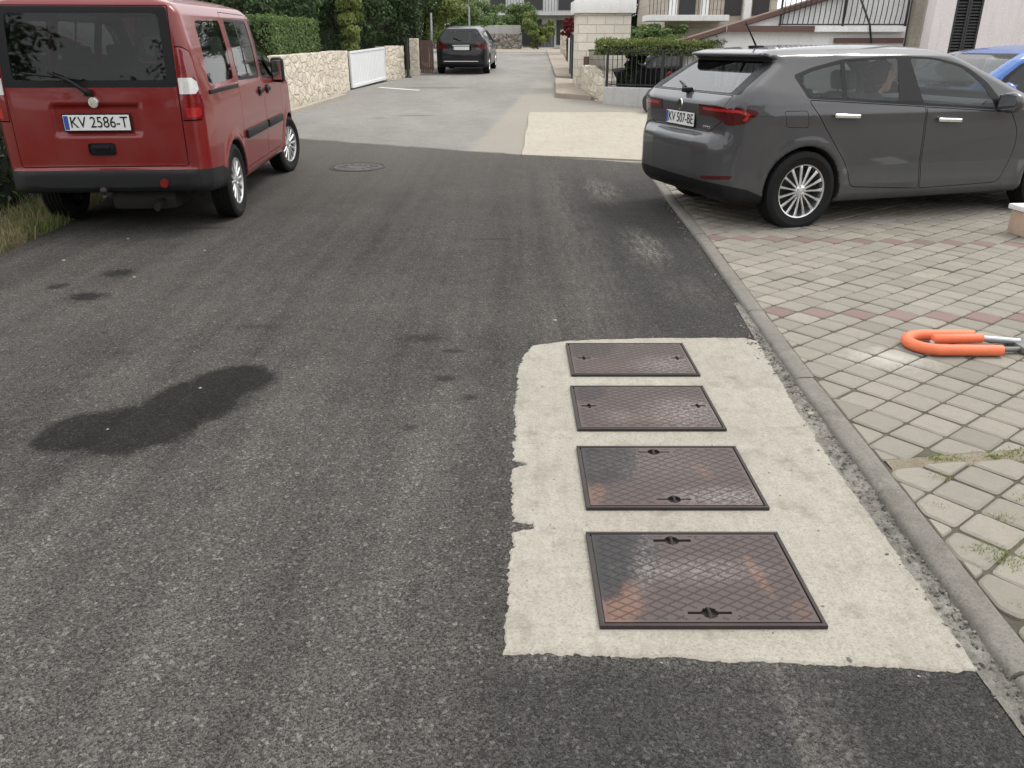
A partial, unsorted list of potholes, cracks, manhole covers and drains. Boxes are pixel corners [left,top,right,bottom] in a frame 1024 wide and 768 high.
manhole cover [570,385,727,432]
manhole cover [566,343,701,377]
manhole cover [329,162,386,172]
manhole cover [576,446,770,511]
manhole cover [586,532,828,629]
